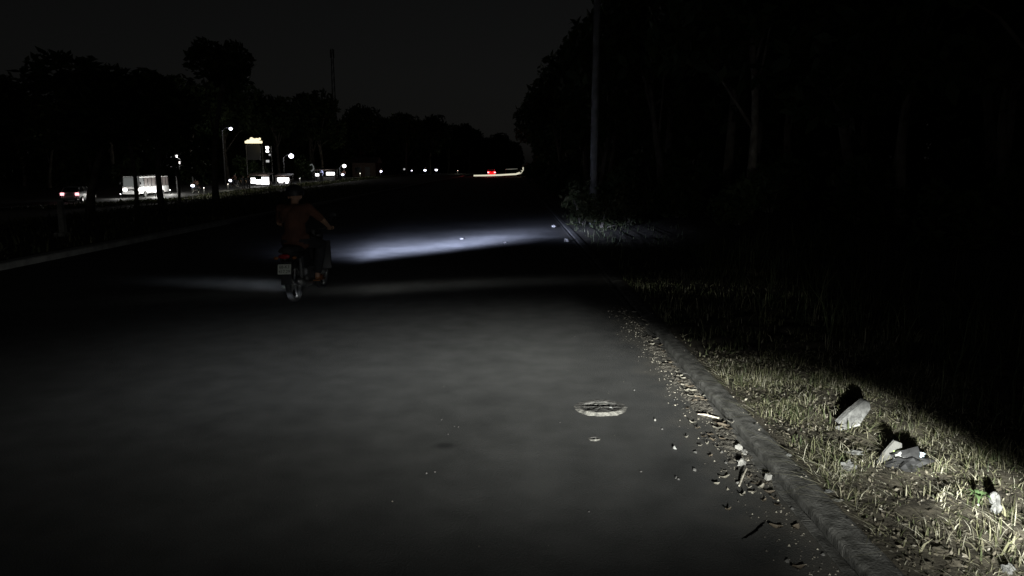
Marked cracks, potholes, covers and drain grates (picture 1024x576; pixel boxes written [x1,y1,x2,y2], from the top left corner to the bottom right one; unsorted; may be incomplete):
pothole [574,399,628,416]
